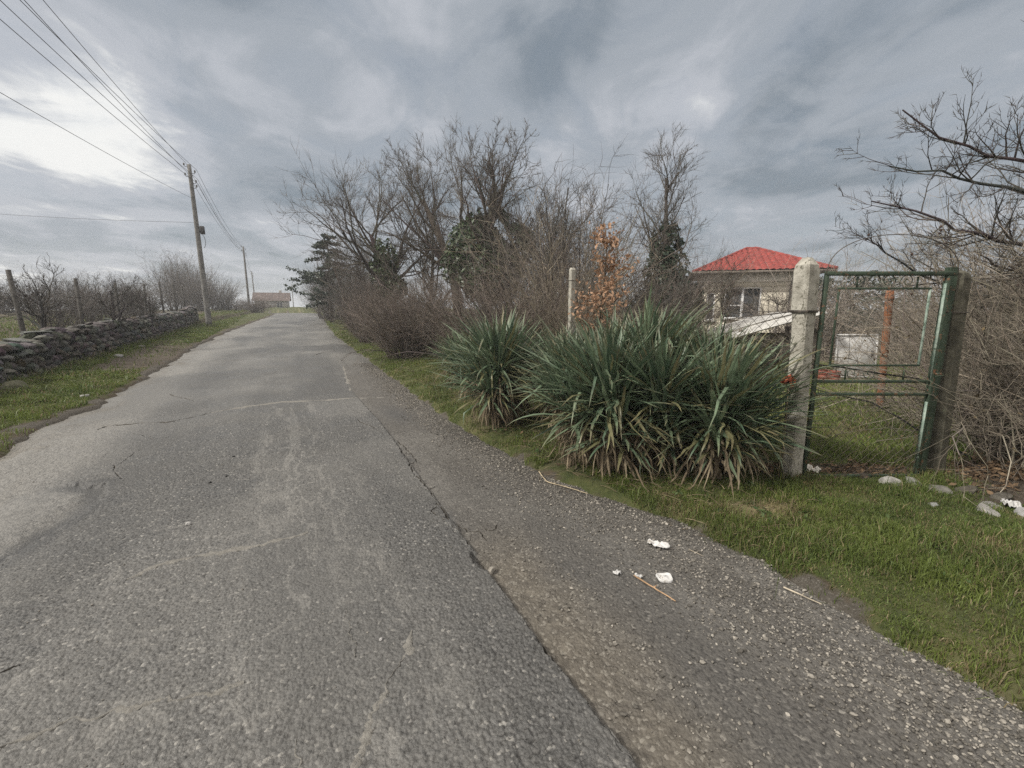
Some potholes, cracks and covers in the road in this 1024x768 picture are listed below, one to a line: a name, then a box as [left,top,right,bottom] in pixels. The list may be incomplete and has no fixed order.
crack [97,343,638,768]
